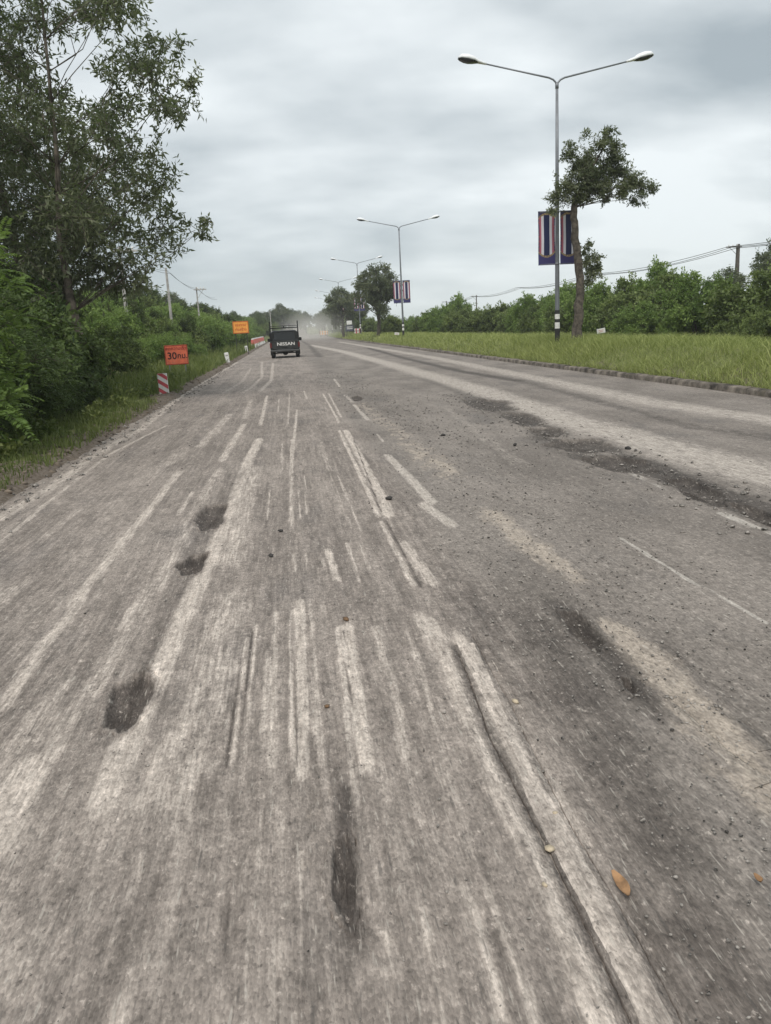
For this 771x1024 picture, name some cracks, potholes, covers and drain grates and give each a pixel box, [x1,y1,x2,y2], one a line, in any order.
pothole [98,666,162,738]
pothole [170,550,212,578]
pothole [191,502,229,533]
pothole [320,827,368,938]
